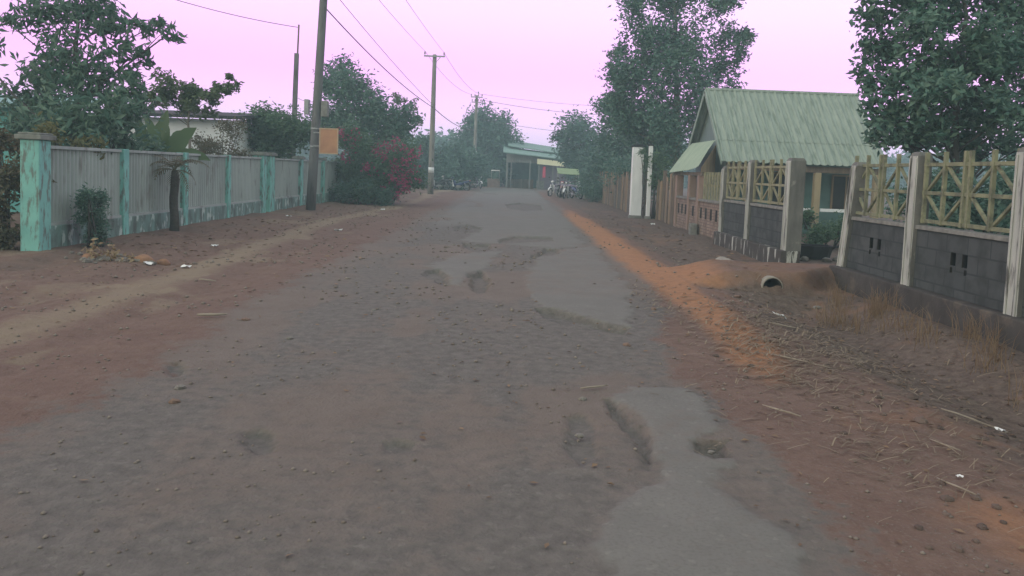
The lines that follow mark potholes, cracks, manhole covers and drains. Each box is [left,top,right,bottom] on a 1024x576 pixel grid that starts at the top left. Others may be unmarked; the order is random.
pothole [564,415,596,467]
pothole [506,203,543,211]
pothole [423,269,451,286]
pothole [467,271,491,293]
pothole [695,440,727,459]
pothole [608,400,653,467]
pothole [165,363,187,377]
pothole [499,236,553,244]
pothole [245,431,277,455]
